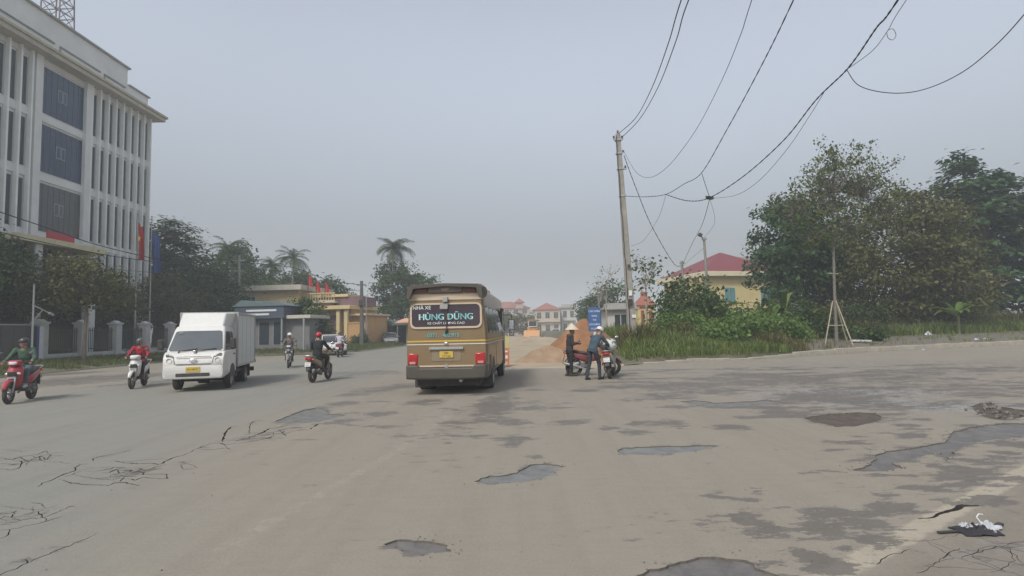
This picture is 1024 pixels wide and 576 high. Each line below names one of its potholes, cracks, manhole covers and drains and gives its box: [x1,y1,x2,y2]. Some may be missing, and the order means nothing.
pothole [276,408,344,424]
crack [0,539,85,575]
crack [878,533,1024,575]
pothole [637,557,779,576]
pothole [385,539,451,555]
crack [0,420,318,487]
pothole [805,412,881,427]
pothole [853,423,1024,471]
pothole [971,402,1024,420]
crack [0,503,72,538]
pothole [474,464,566,484]
pothole [617,445,716,455]
